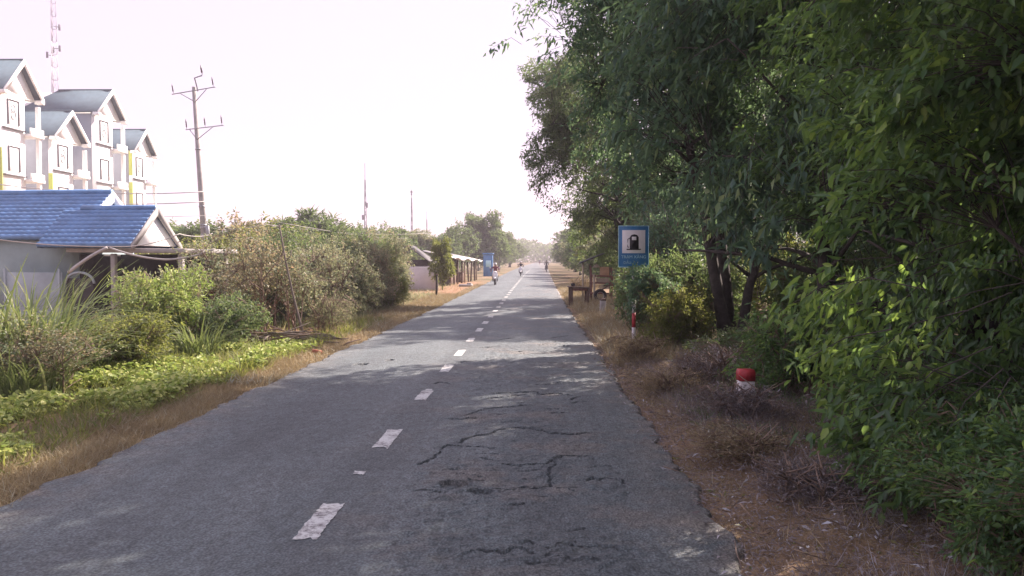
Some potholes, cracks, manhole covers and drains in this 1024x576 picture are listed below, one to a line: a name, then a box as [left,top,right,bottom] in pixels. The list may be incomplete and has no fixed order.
crack [462,527,620,565]
crack [418,382,626,506]
